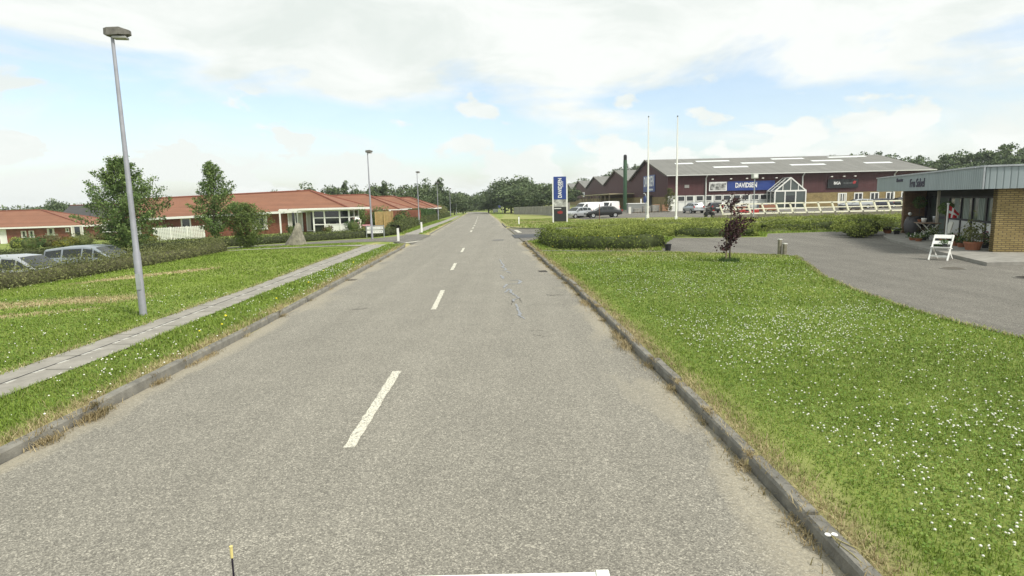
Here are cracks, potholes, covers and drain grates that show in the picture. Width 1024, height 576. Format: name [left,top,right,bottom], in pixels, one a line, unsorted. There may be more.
crack [498,259,525,319]
